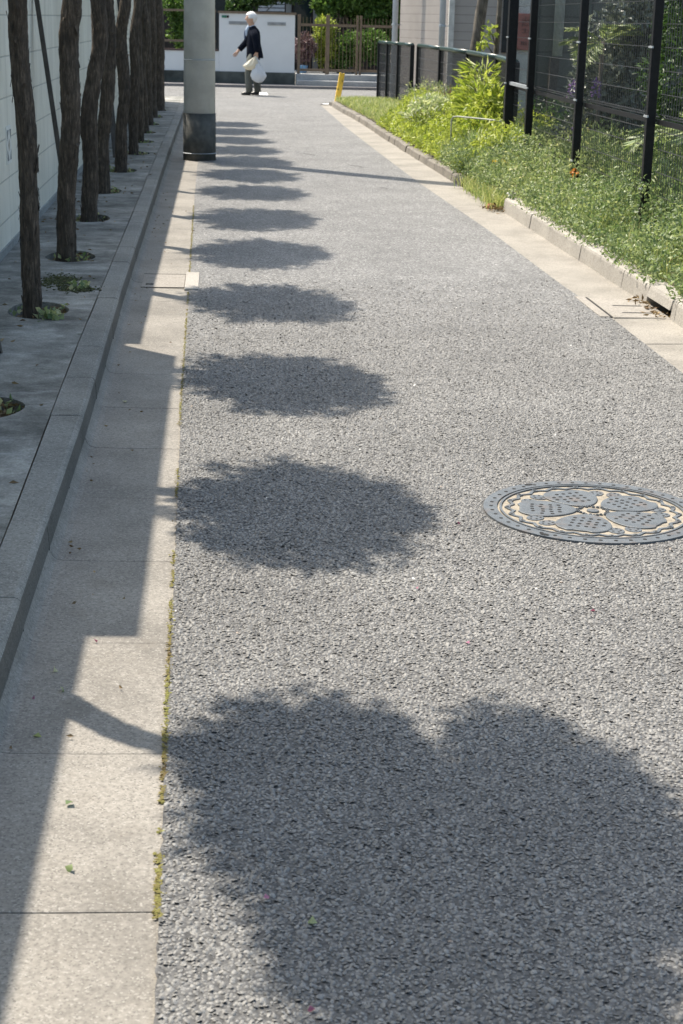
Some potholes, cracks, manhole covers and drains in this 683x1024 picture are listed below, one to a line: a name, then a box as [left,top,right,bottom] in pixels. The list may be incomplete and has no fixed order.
manhole cover [483,481,683,545]
